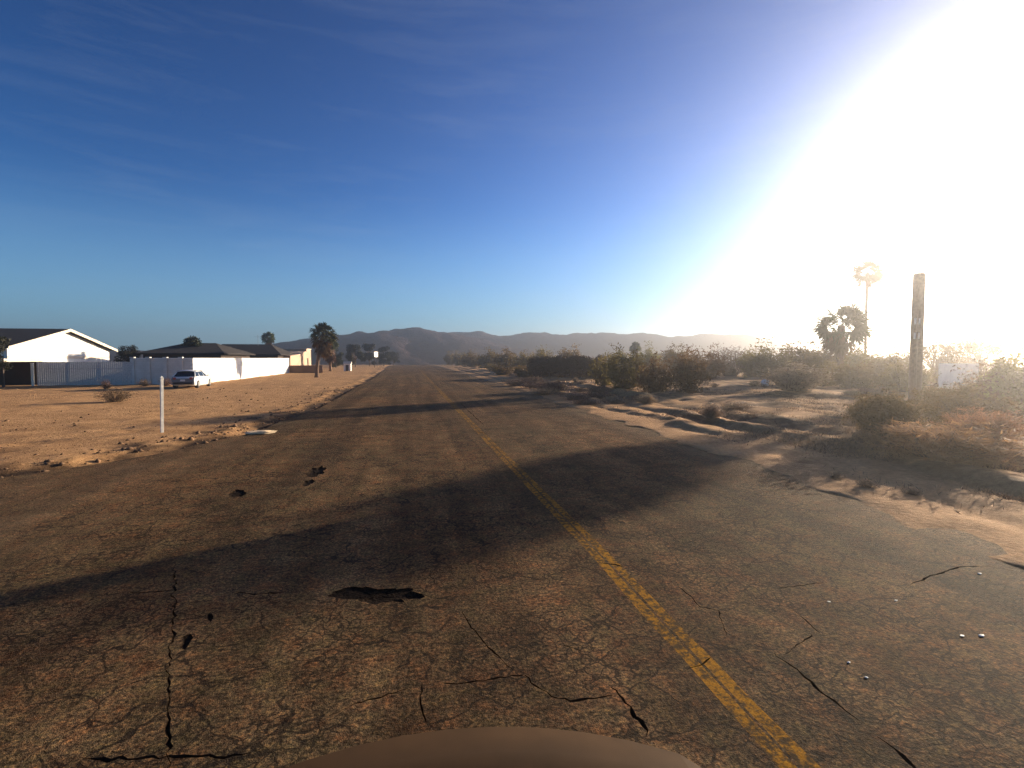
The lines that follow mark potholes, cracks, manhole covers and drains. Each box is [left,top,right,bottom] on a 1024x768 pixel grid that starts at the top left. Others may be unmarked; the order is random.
crack [909,566,1012,586]
crack [775,608,858,720]
pothole [328,586,425,604]
crack [878,737,916,768]
crack [80,564,251,768]
pothole [305,465,326,477]
crack [446,612,648,736]
pothole [179,634,193,650]
